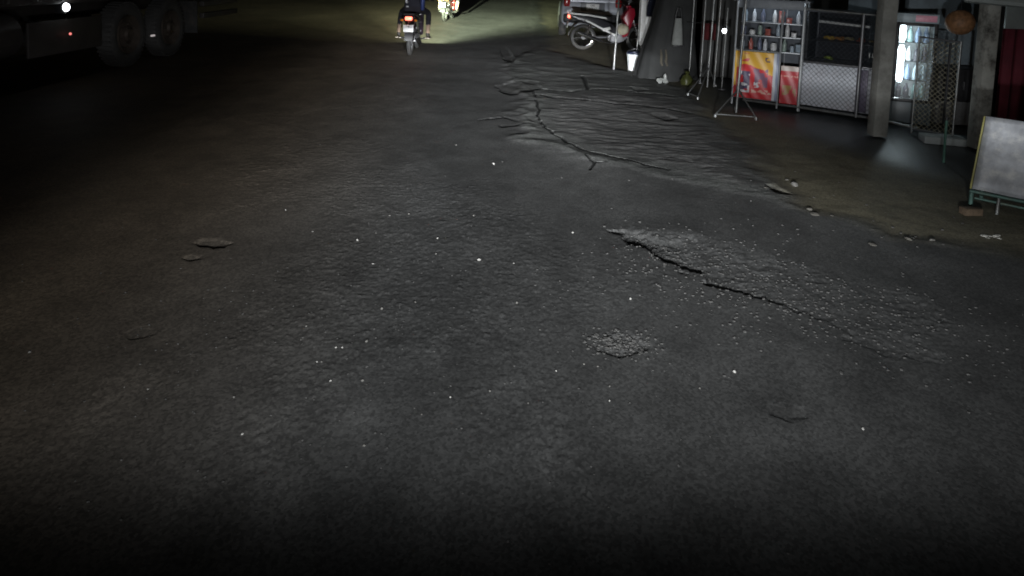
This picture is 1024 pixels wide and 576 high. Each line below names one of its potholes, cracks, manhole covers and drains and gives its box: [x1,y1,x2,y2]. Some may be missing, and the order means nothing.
pothole [592,330,654,358]
pothole [192,237,236,249]
pothole [607,223,973,365]
pothole [182,253,205,262]
pothole [122,325,161,340]
pothole [766,400,813,423]
crack [477,75,695,170]
